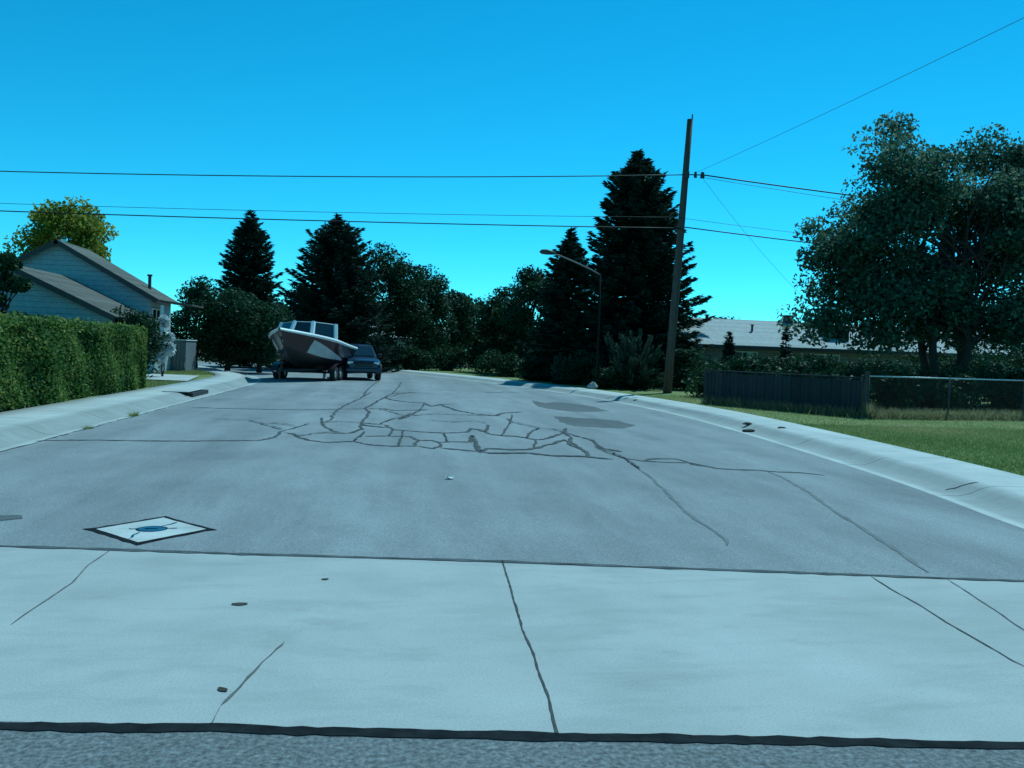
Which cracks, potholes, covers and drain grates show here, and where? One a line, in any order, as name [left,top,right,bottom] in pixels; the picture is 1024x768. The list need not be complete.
manhole cover [84,516,217,545]
crack [211,641,285,723]
crack [13,550,110,623]
drain grate [162,387,208,397]
crack [595,446,1024,666]
